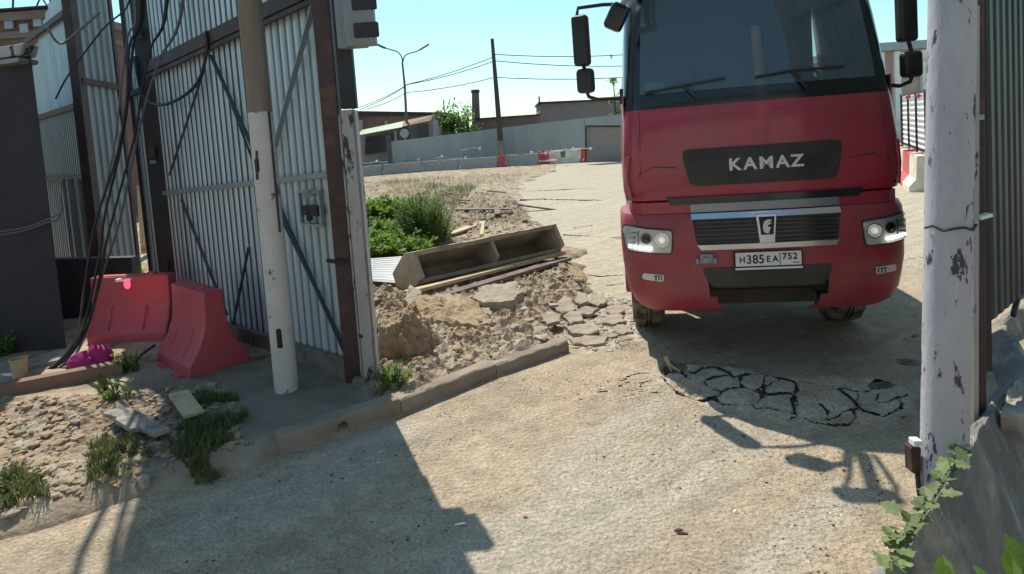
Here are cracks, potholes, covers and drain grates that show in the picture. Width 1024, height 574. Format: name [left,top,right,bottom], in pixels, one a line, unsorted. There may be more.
pothole [897,357,921,365]
crack [601,367,904,427]
